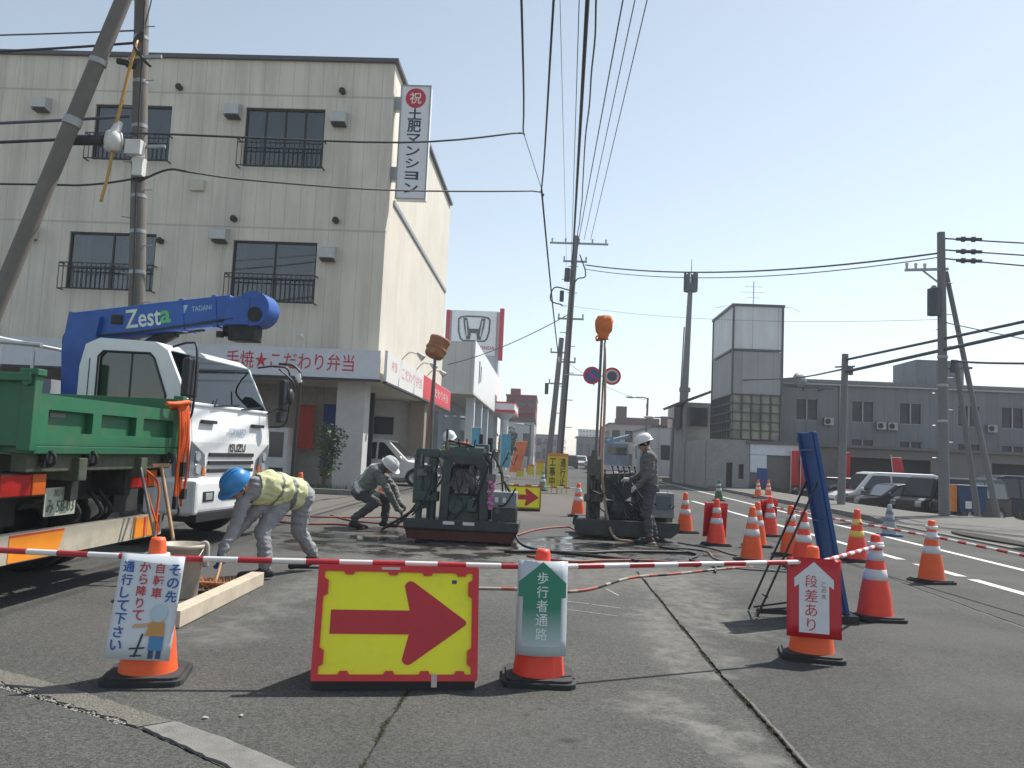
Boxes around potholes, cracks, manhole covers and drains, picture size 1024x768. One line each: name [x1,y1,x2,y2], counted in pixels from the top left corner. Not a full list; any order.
crack [359,689,412,768]
